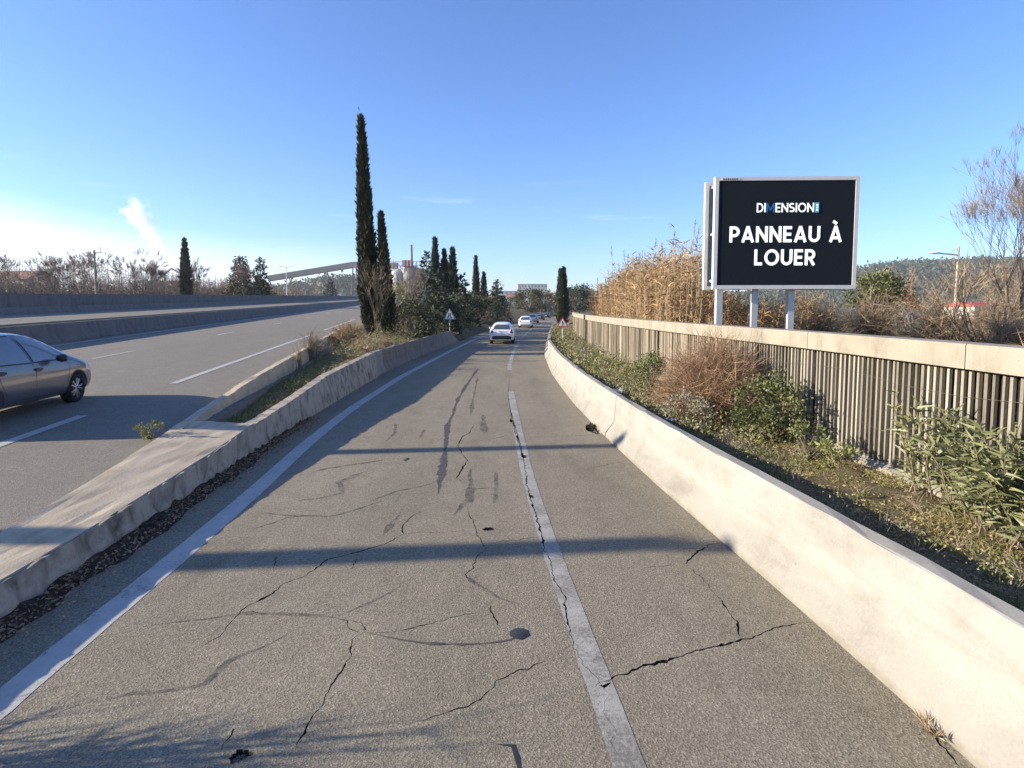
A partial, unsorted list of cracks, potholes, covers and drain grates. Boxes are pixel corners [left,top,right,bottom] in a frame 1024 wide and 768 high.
crack [200,377,809,757]
pothole [229,749,254,764]
